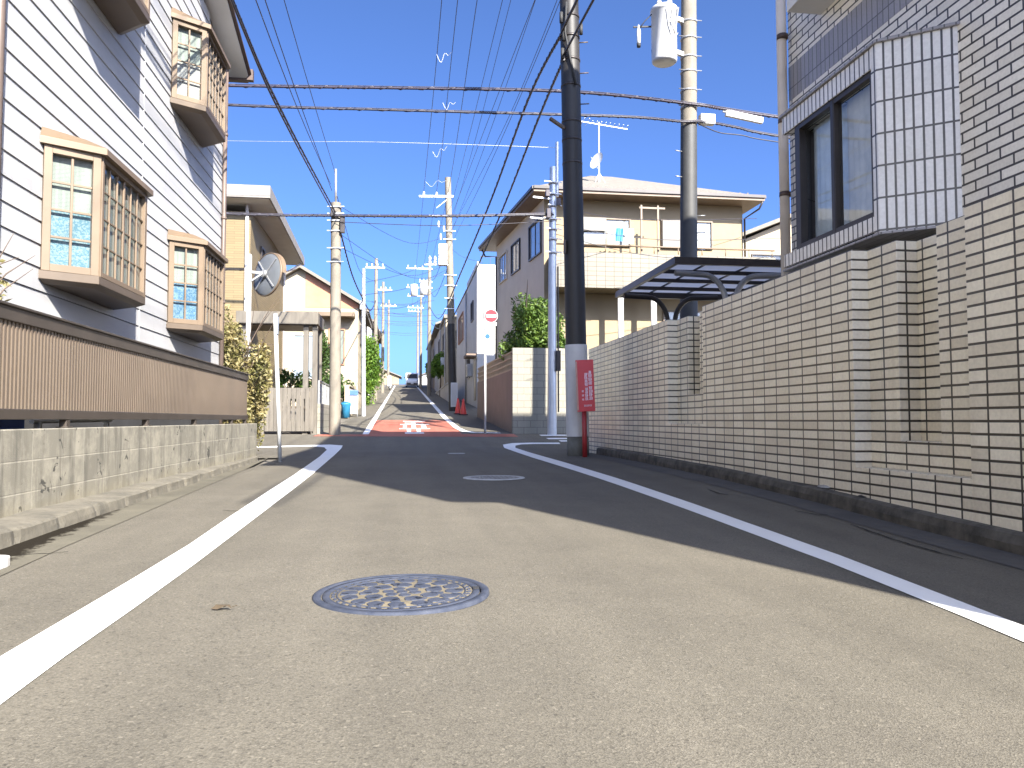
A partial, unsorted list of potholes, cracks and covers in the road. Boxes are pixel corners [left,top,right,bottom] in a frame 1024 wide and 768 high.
manhole cover [312,574,489,616]
crack [851,524,963,559]
